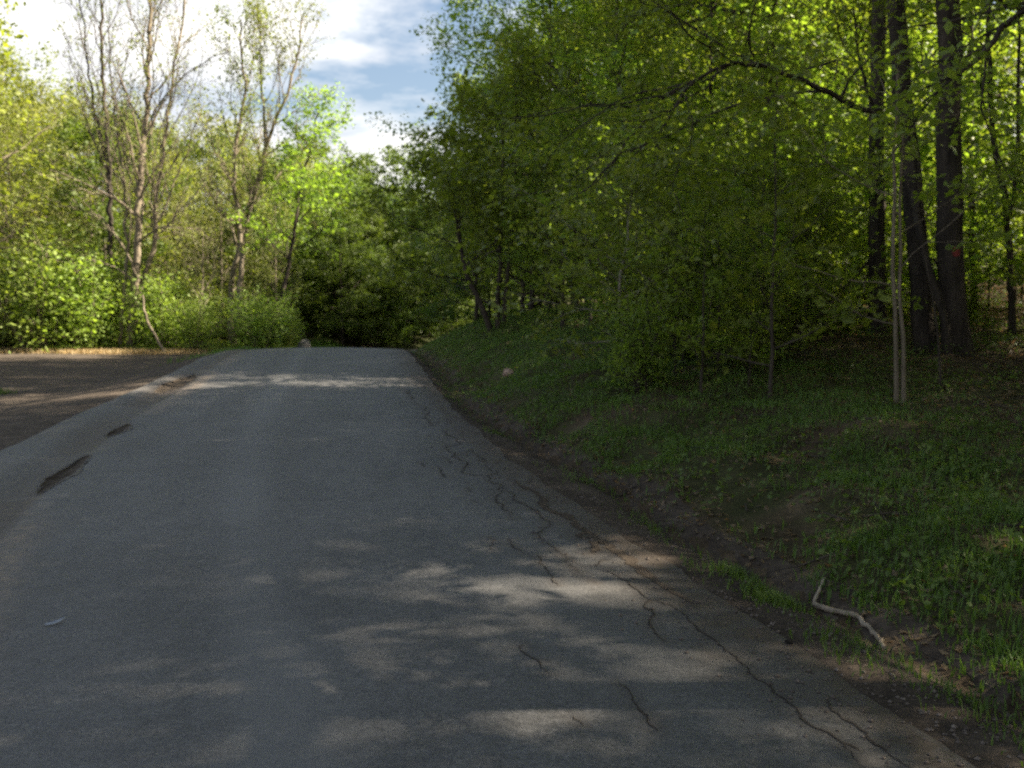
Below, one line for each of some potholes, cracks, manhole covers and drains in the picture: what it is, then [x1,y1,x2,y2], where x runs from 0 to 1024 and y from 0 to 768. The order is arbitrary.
crack [406,390,911,768]
pothole [34,454,92,495]
pothole [153,375,197,394]
pothole [103,423,133,438]
